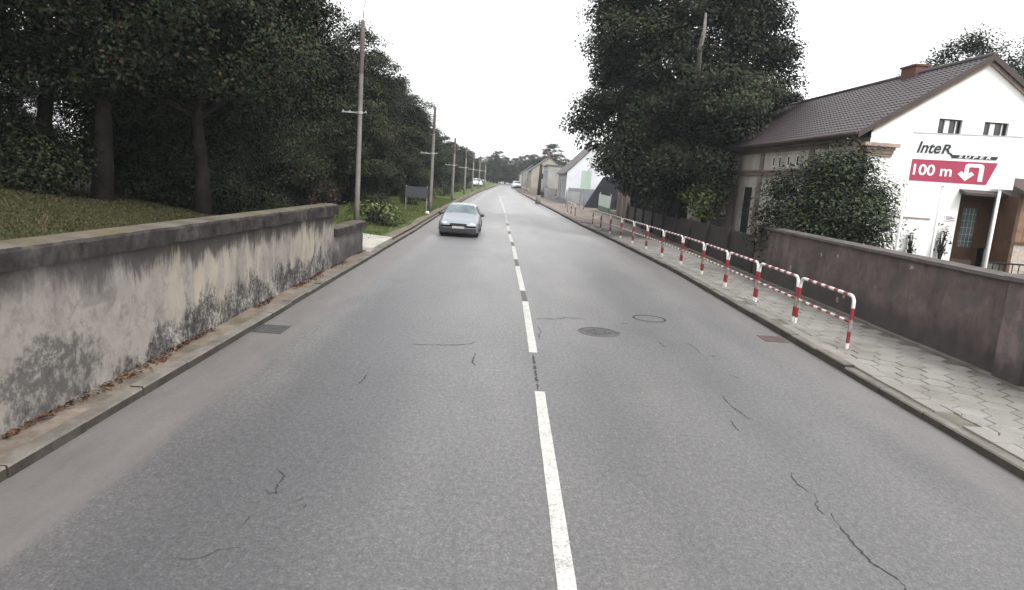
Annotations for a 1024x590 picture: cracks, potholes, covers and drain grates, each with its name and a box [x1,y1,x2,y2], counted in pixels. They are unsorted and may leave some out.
crack [266,471,306,508]
manhole cover [577,327,620,337]
crack [791,474,907,590]
drain grate [251,324,291,334]
